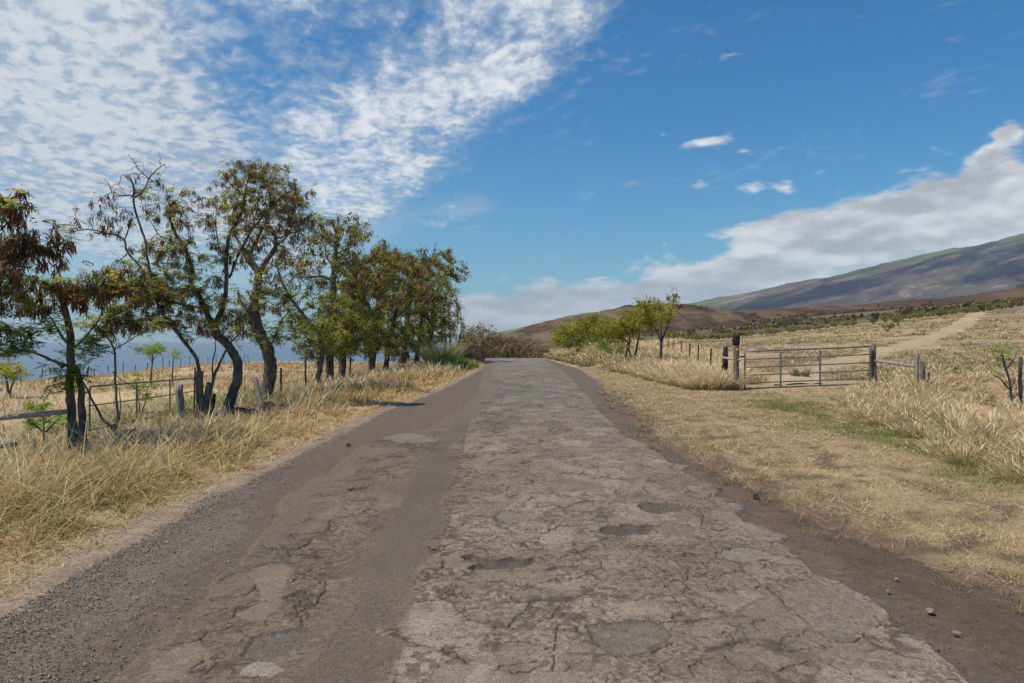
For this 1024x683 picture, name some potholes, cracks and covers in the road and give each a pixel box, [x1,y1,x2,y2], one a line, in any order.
pothole [638,502,684,515]
crack [159,402,898,682]
pothole [599,523,655,537]
pothole [460,554,537,570]
